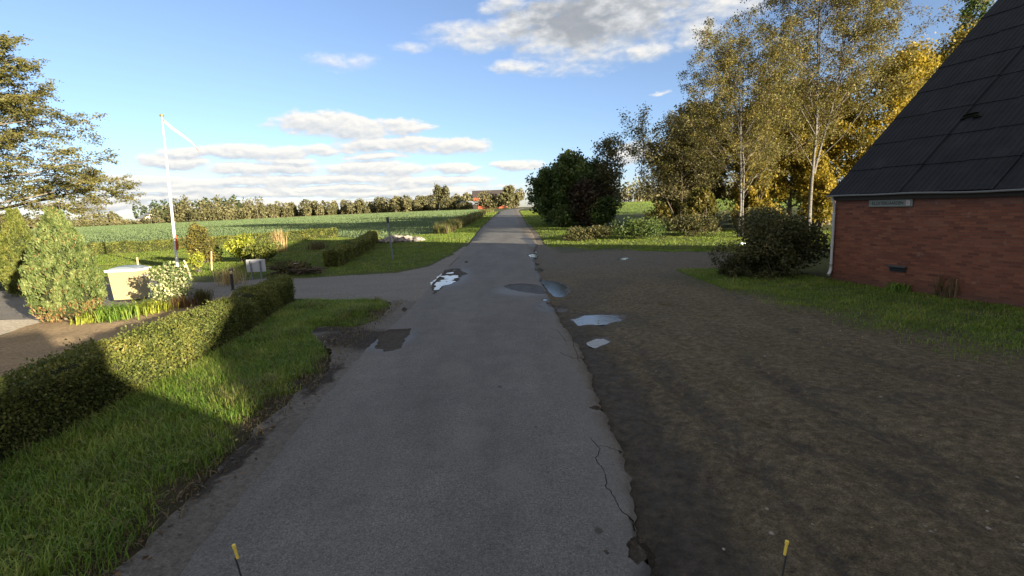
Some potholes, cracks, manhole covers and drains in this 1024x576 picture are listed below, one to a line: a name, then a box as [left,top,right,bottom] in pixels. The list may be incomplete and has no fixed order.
pothole [430,268,468,294]
crack [592,440,637,535]
pothole [626,535,656,568]
pothole [375,328,411,352]
pothole [504,283,548,294]
pothole [539,277,571,298]
